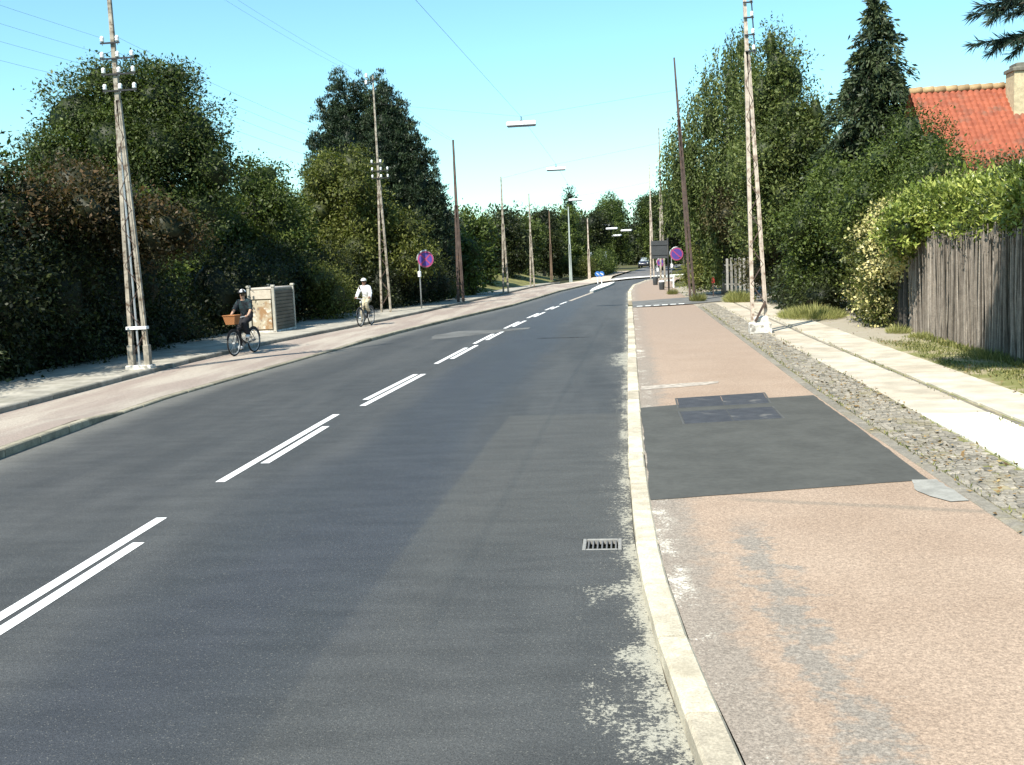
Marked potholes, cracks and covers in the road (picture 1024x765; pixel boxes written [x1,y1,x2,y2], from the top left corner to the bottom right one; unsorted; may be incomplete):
manhole cover [678,406,785,424]
manhole cover [675,392,771,408]
